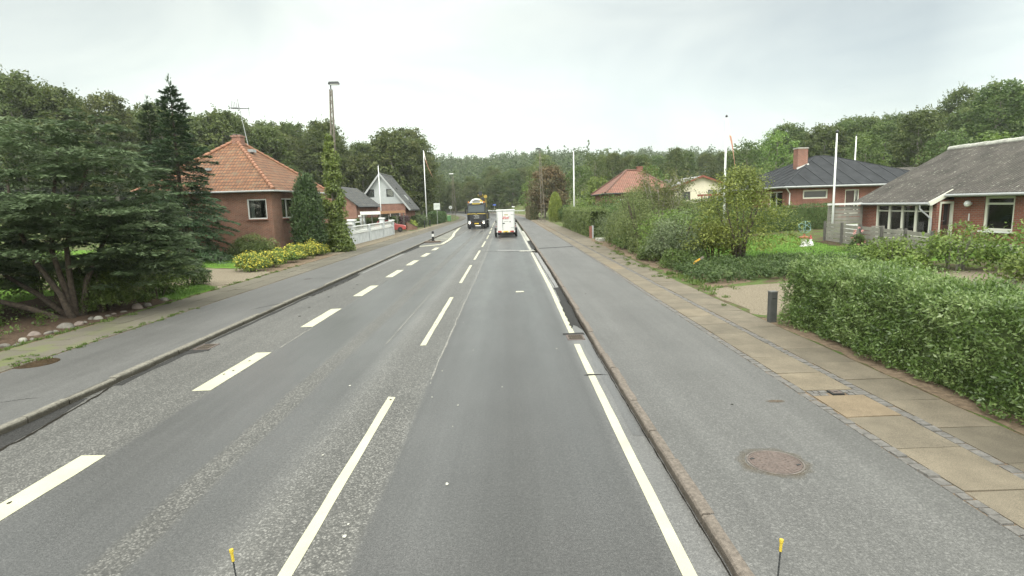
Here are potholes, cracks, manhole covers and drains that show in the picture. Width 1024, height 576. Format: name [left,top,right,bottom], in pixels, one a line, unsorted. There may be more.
manhole cover [746,450,805,475]
